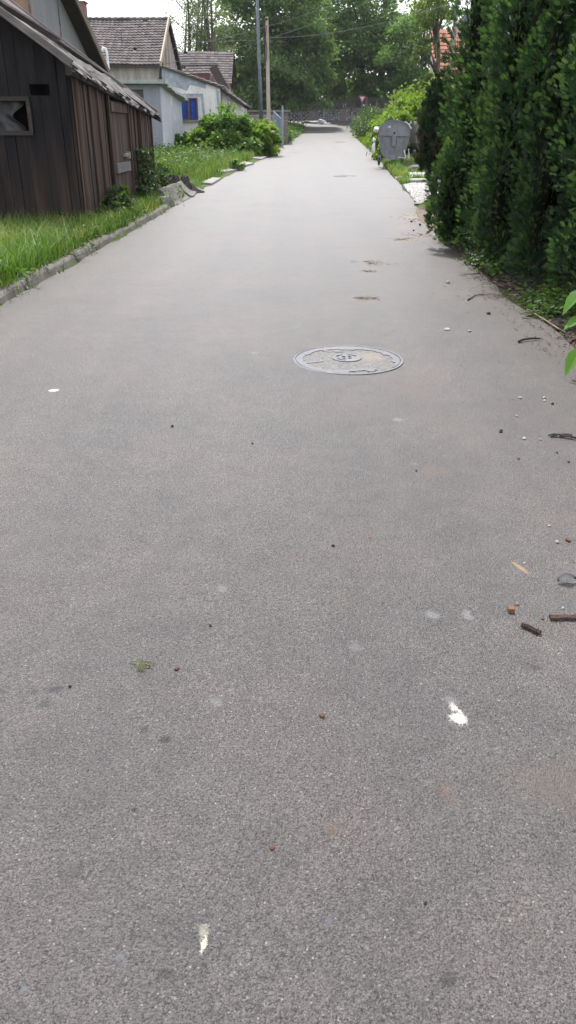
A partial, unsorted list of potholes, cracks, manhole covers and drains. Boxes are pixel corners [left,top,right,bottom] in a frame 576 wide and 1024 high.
manhole cover [293,345,403,375]
